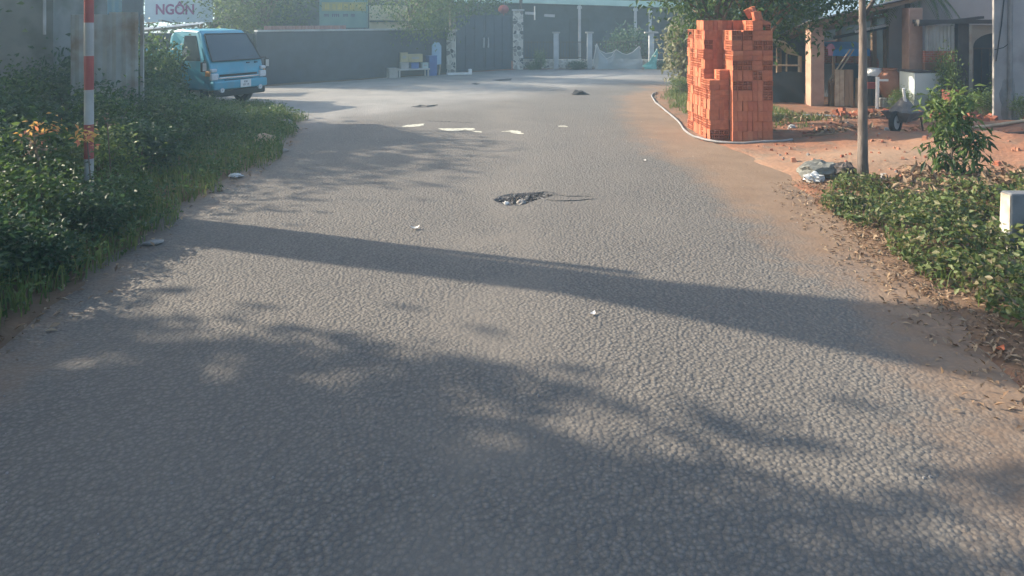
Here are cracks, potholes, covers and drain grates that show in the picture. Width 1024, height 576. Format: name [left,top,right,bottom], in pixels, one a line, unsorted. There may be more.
pothole [494,191,556,206]
